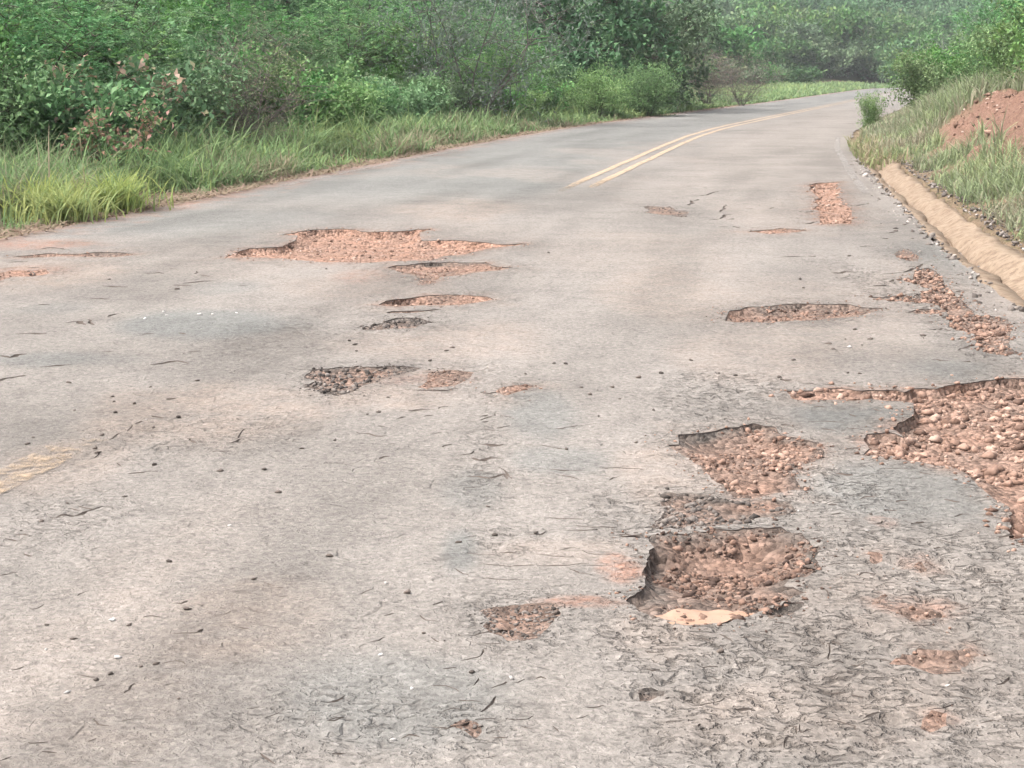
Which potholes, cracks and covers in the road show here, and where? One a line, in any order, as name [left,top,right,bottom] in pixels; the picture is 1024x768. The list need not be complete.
pothole [706,300,891,323]
crack [697,537,915,748]
pothole [343,315,447,331]
pothole [0,269,49,281]
pothole [769,372,1024,552]
crack [830,496,924,534]
pothole [637,206,693,217]
pothole [803,182,864,225]
pothole [223,227,529,263]
crack [897,677,1010,731]
